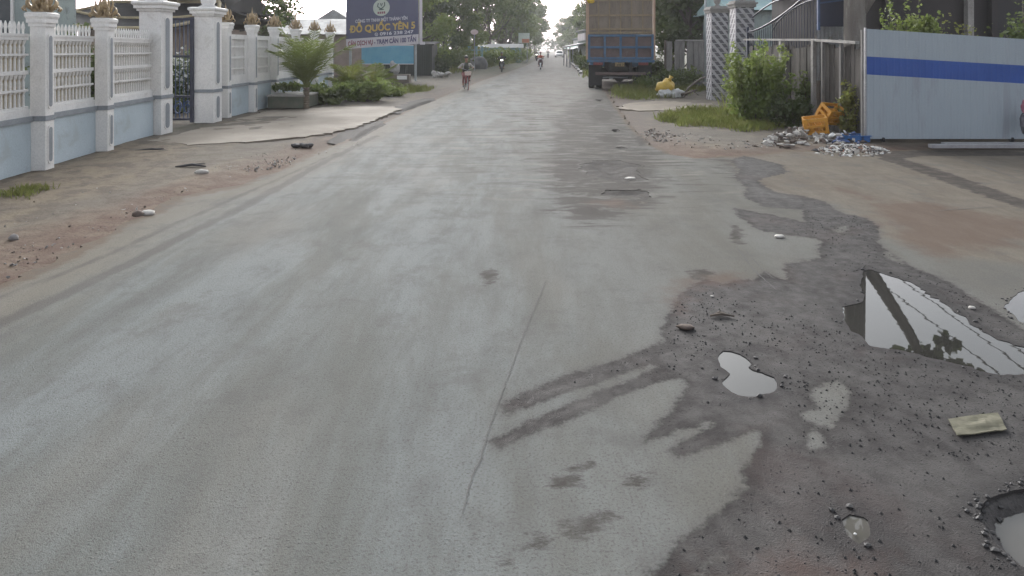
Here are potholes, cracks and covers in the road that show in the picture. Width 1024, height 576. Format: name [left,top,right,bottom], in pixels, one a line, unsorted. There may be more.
pothole [601,189,652,200]
pothole [707,348,788,401]
pothole [962,478,1024,569]
pothole [827,503,881,548]
crack [461,281,546,517]
pothole [832,268,1024,375]
